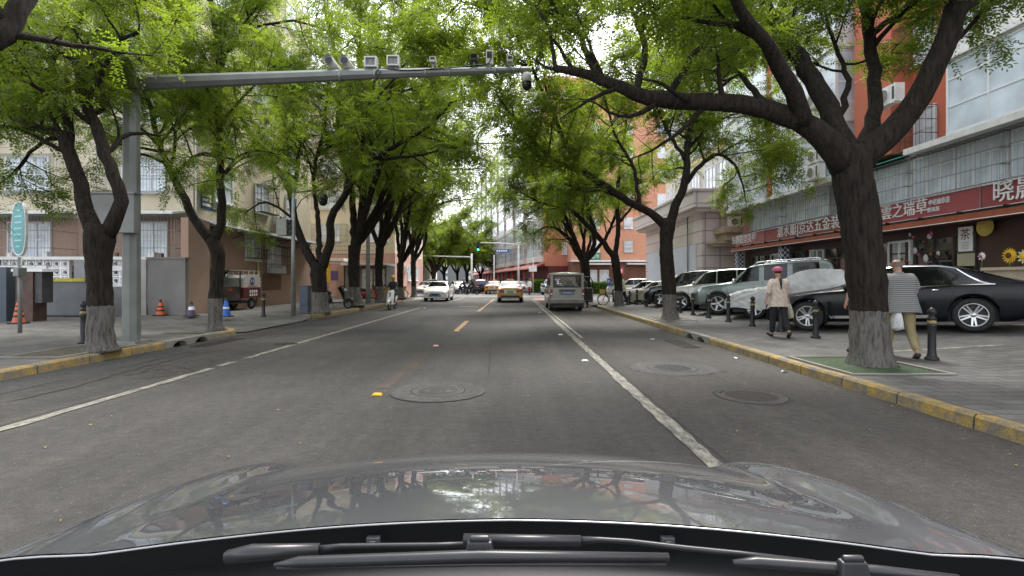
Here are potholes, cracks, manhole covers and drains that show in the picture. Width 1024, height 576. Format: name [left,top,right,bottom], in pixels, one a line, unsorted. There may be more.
manhole cover [390,382,485,402]
drain grate [159,333,214,348]
manhole cover [628,361,718,376]
drain grate [682,330,715,344]
manhole cover [712,388,794,405]
drain grate [188,338,245,347]
drain grate [665,340,701,348]
